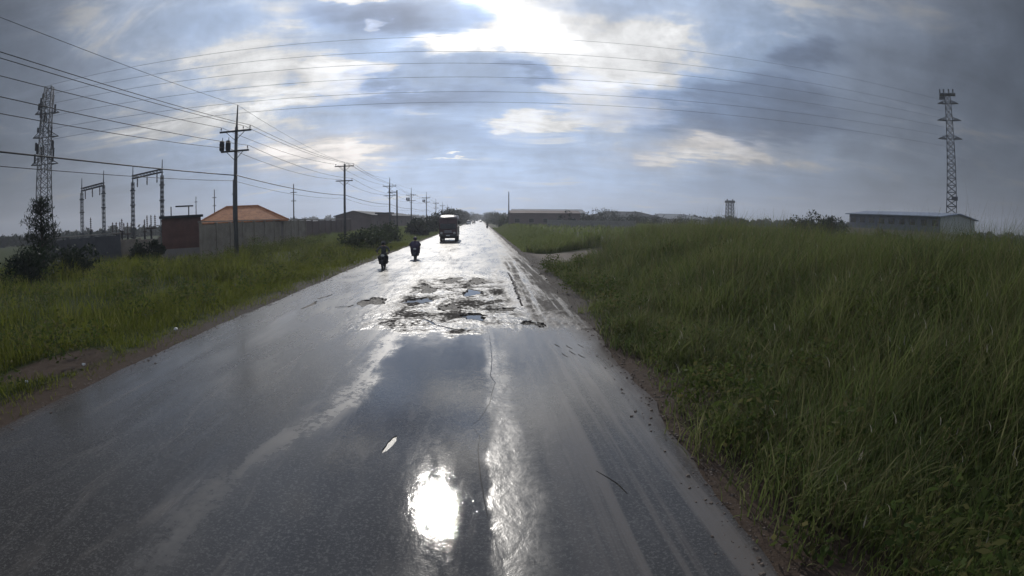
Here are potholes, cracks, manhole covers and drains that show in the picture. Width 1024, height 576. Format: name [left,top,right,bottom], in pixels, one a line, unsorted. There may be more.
pothole [462,288,484,297]
pothole [357,297,387,307]
pothole [459,313,488,321]
crack [508,273,523,306]
